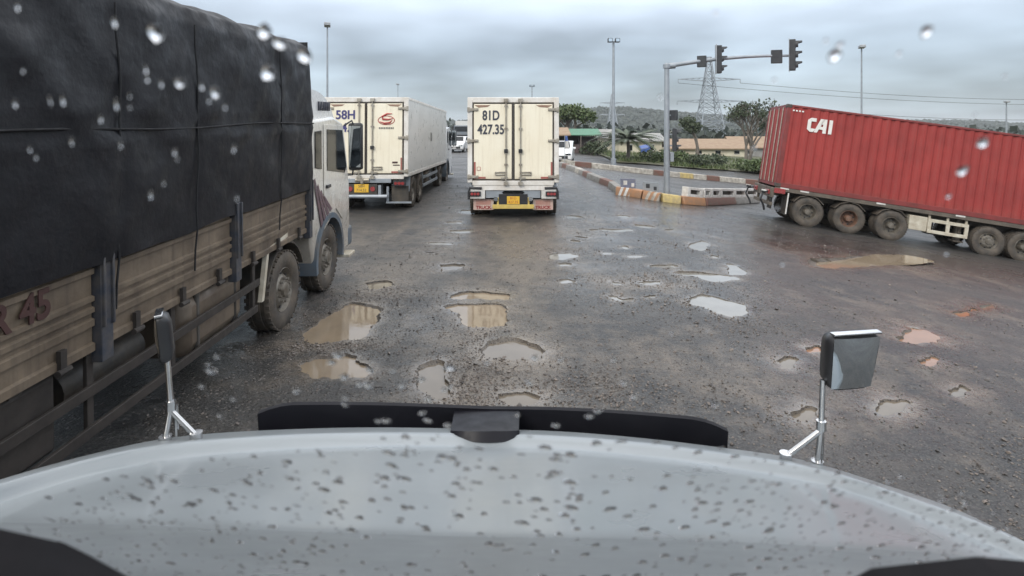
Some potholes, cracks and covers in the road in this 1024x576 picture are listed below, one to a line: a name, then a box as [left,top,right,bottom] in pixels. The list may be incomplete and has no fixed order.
pothole [549,252,578,260]
pothole [875,399,912,416]
pothole [686,294,749,317]
pothole [808,254,935,269]
pothole [688,240,709,251]
pothole [790,405,818,422]
pothole [896,327,940,344]
pothole [443,303,509,328]
pothole [480,337,545,360]
pothole [778,356,799,369]
pothole [302,302,384,344]
pothole [672,270,740,282]
